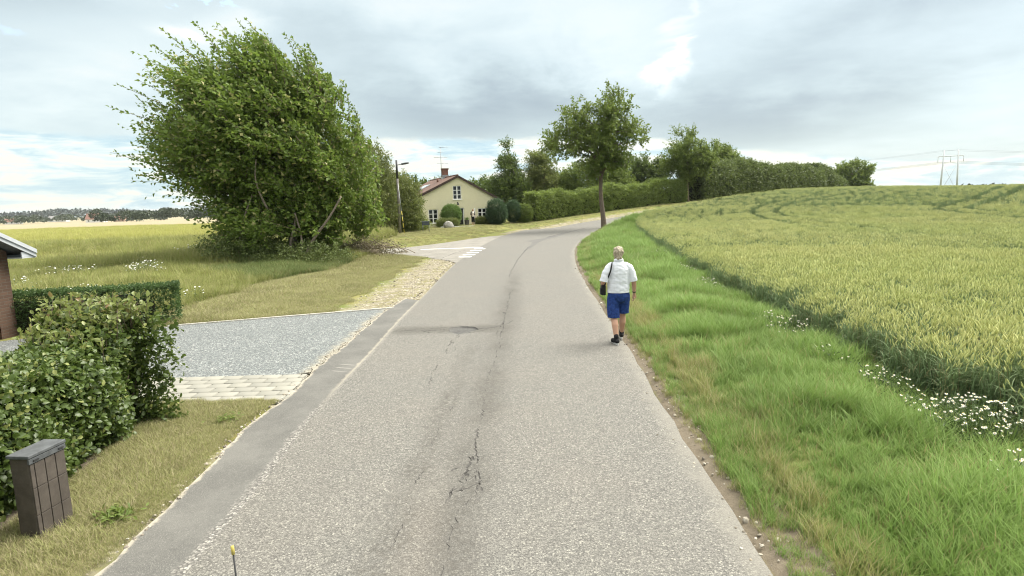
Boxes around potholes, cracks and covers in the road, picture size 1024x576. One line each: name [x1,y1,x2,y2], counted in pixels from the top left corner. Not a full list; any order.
crack [407,290,513,576]
crack [389,396,458,550]
